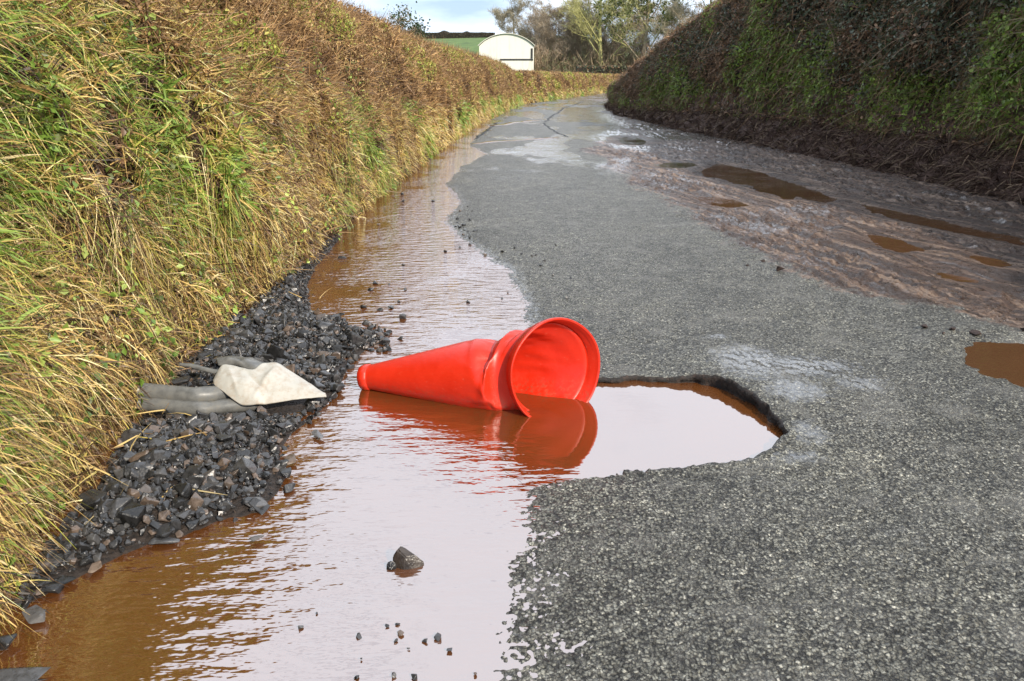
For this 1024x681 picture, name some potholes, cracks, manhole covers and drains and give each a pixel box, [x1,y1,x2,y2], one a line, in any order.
pothole [964,342,1024,387]
pothole [495,372,798,487]
